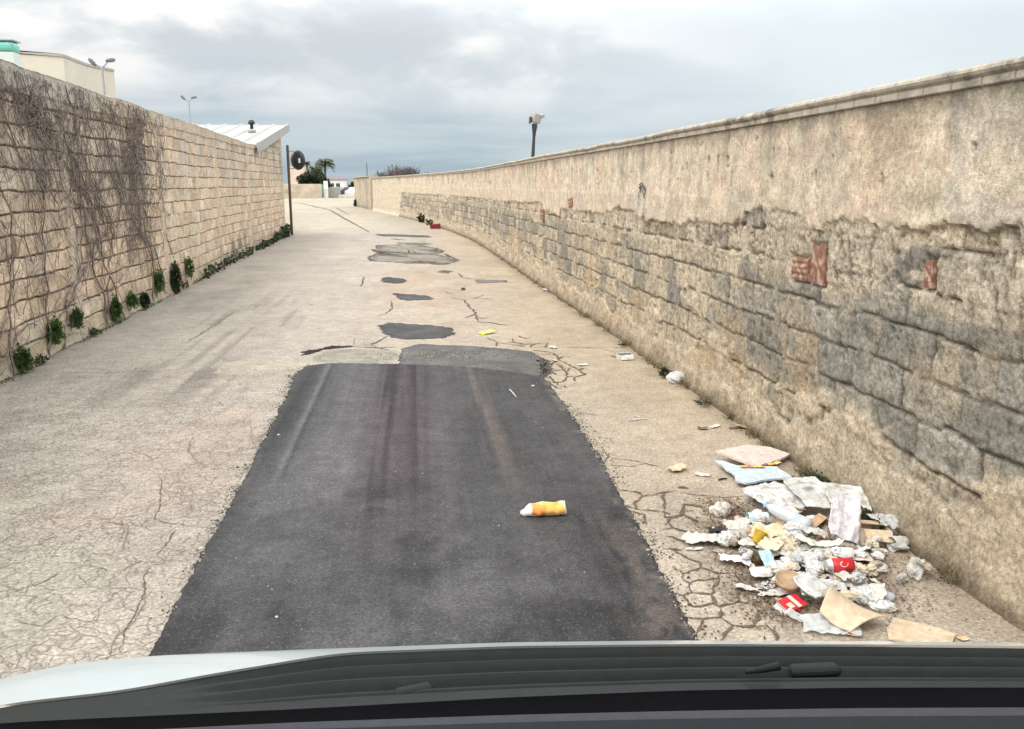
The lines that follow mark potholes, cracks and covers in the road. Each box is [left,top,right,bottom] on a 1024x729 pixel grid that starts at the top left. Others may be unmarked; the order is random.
crack [6,481,184,657]
crack [619,489,780,641]
crack [351,244,647,389]
